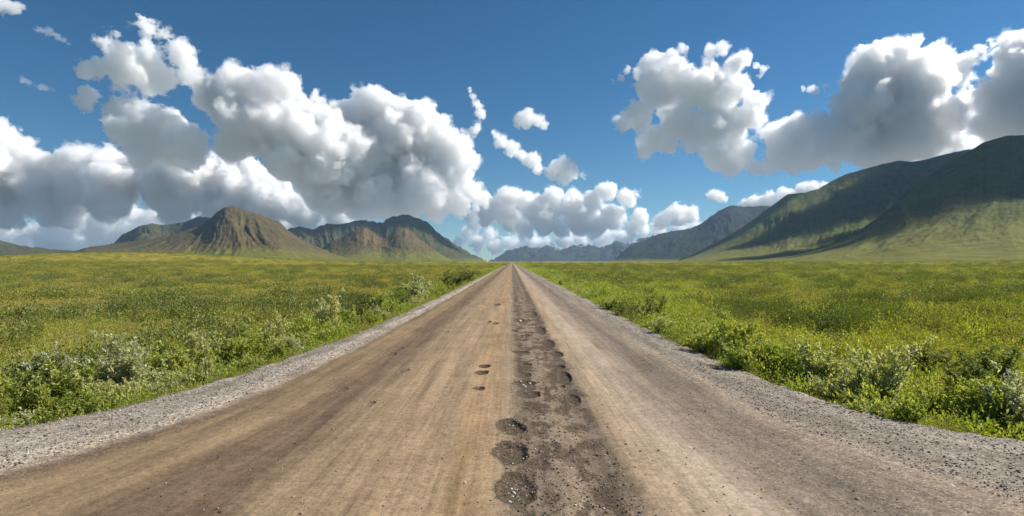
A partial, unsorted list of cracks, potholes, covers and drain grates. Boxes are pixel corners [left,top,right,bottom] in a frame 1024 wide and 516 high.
pothole [555,370,574,384]
pothole [563,393,584,407]
pothole [517,390,543,400]
pothole [547,350,565,358]
pothole [491,470,542,510]
pothole [488,440,533,468]
pothole [540,339,556,350]
pothole [494,417,530,437]
